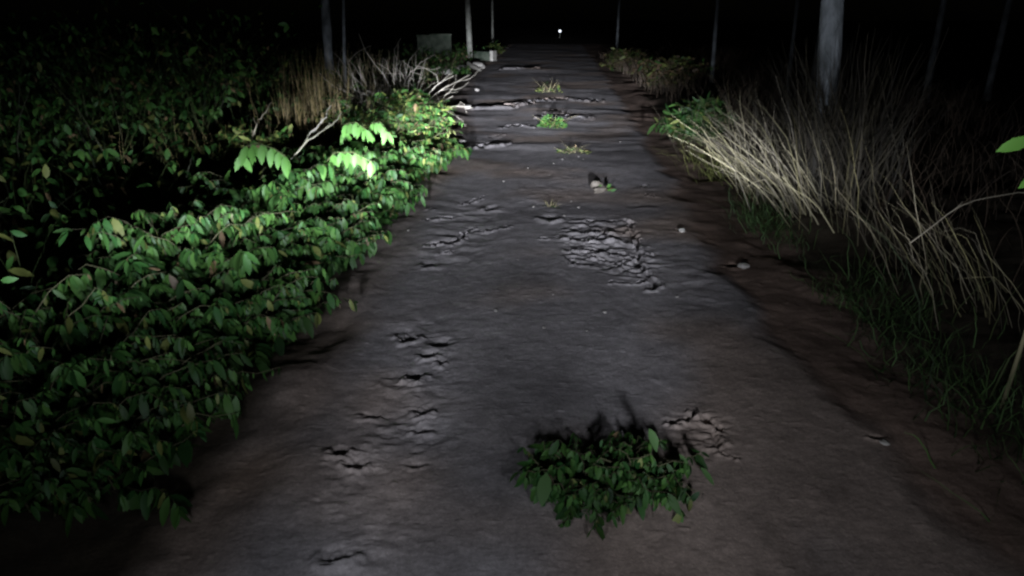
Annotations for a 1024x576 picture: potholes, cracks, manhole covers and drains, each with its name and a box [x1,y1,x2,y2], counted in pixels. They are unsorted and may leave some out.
crack [424,195,508,254]
crack [540,218,664,290]
crack [670,410,740,459]
crack [453,97,599,148]
